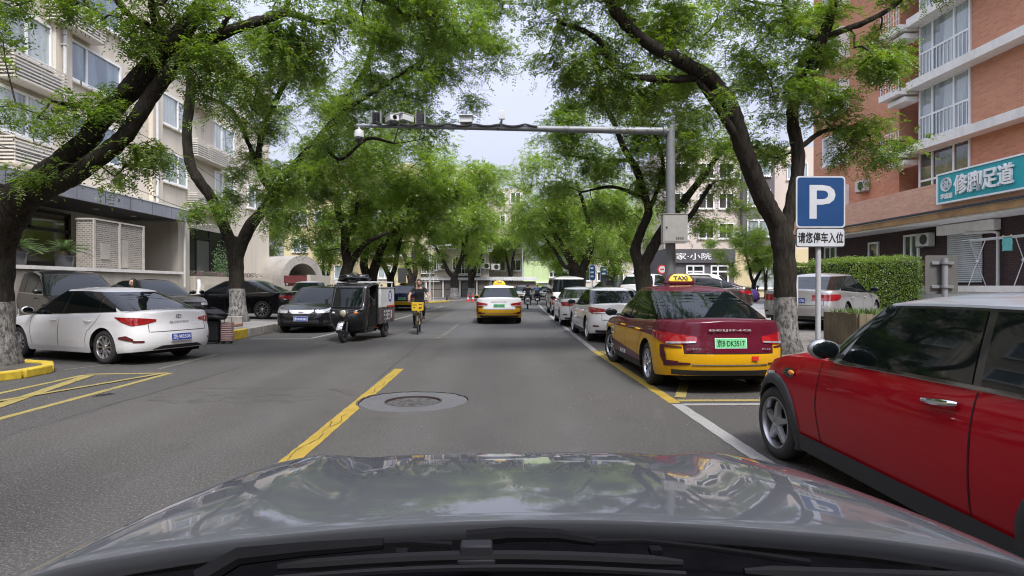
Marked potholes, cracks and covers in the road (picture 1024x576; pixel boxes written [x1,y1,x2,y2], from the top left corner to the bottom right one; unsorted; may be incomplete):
manhole cover [358,391,468,412]
